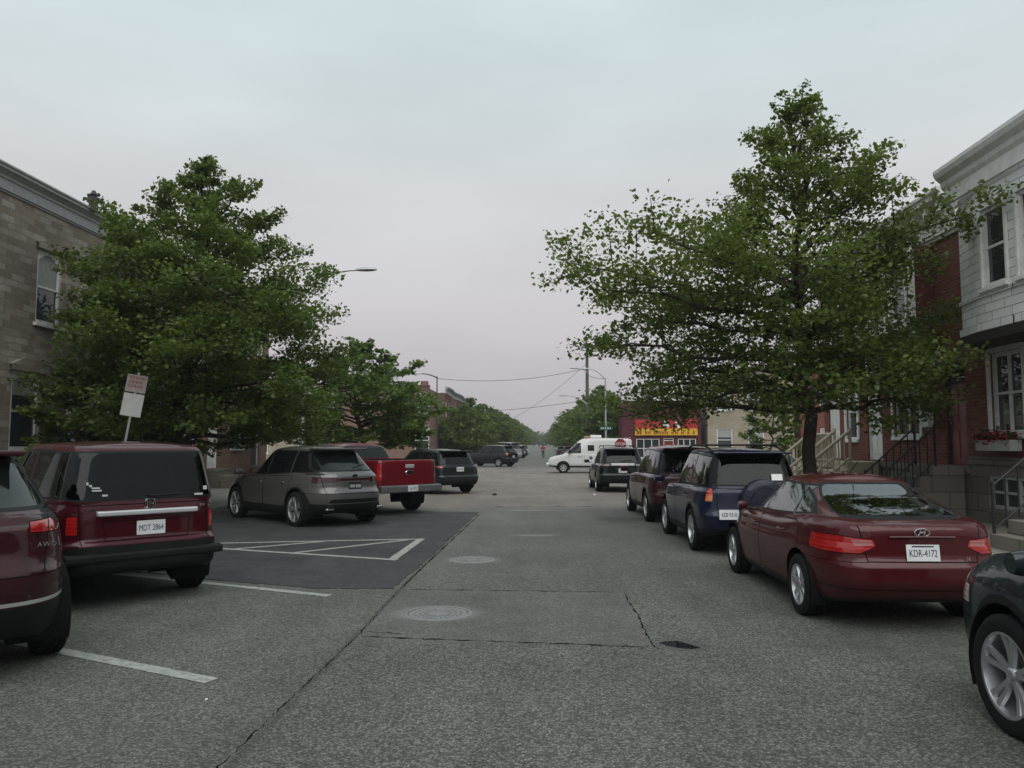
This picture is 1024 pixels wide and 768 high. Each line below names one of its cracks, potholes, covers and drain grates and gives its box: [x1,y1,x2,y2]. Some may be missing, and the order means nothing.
crack [216,515,658,768]
pothole [660,641,700,649]
manhole cover [403,606,473,621]
